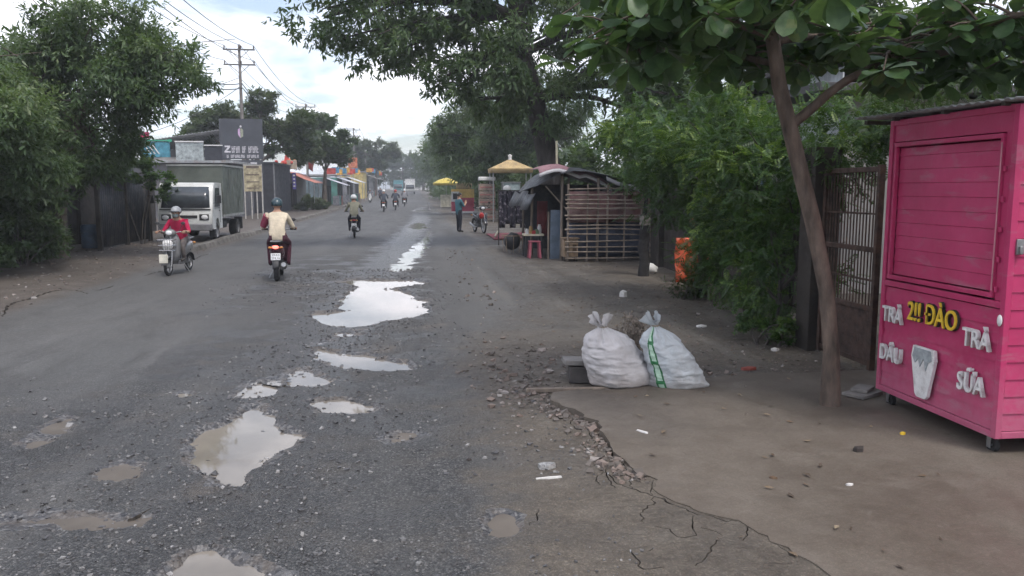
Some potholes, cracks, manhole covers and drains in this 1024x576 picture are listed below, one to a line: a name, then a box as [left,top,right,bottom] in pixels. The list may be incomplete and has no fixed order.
pothole [146,543,299,576]
pothole [262,366,337,387]
pothole [388,230,434,274]
pothole [303,277,434,327]
pothole [477,508,527,538]
pothole [91,459,149,482]
pothole [12,412,79,450]
pothole [0,507,156,532]
pothole [308,346,418,371]
pothole [303,396,385,415]
crack [570,420,749,570]
crack [0,286,113,317]
